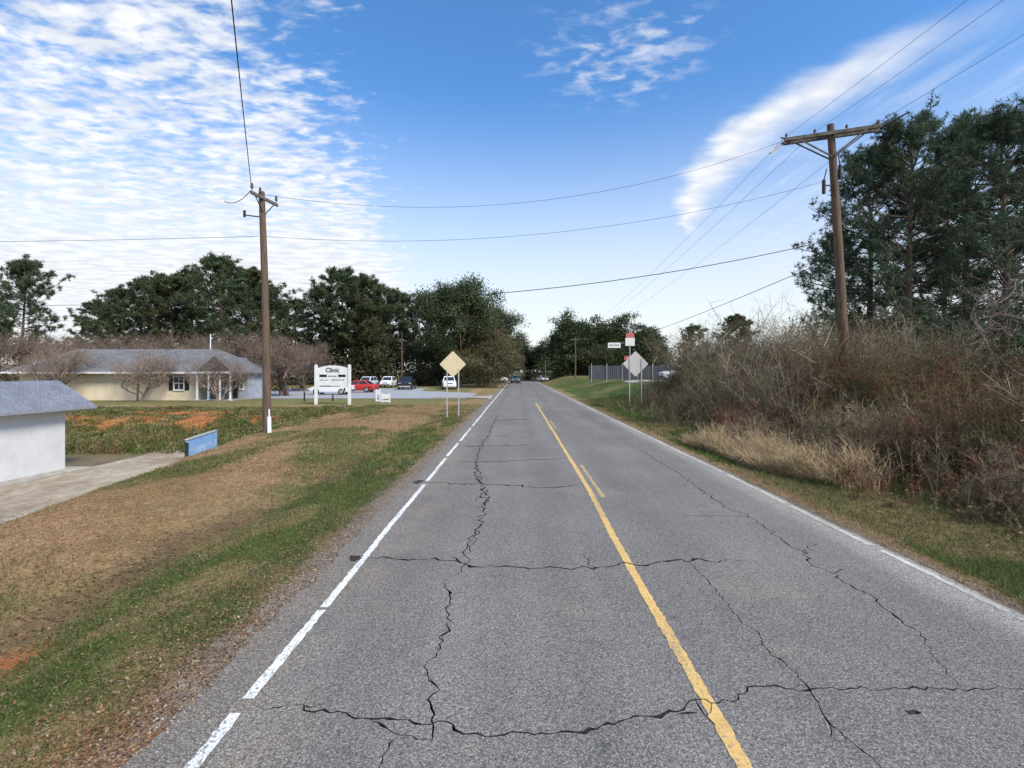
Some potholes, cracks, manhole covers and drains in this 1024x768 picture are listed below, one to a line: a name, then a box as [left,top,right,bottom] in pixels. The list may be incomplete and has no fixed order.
crack [256,419,1024,768]
